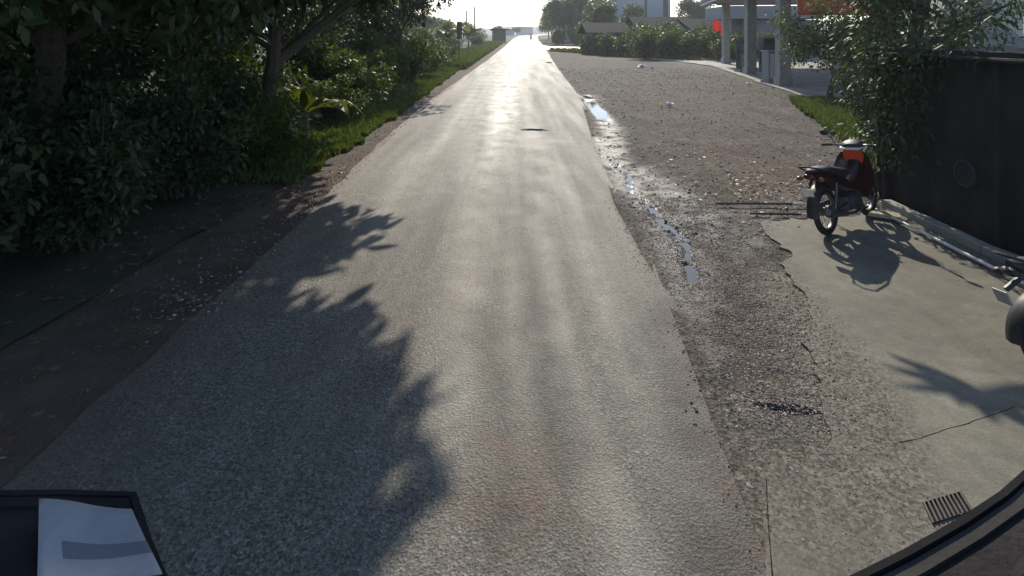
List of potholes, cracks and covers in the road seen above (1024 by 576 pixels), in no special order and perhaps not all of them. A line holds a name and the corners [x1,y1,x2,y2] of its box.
pothole [752,402,822,416]
crack [893,406,1016,444]
